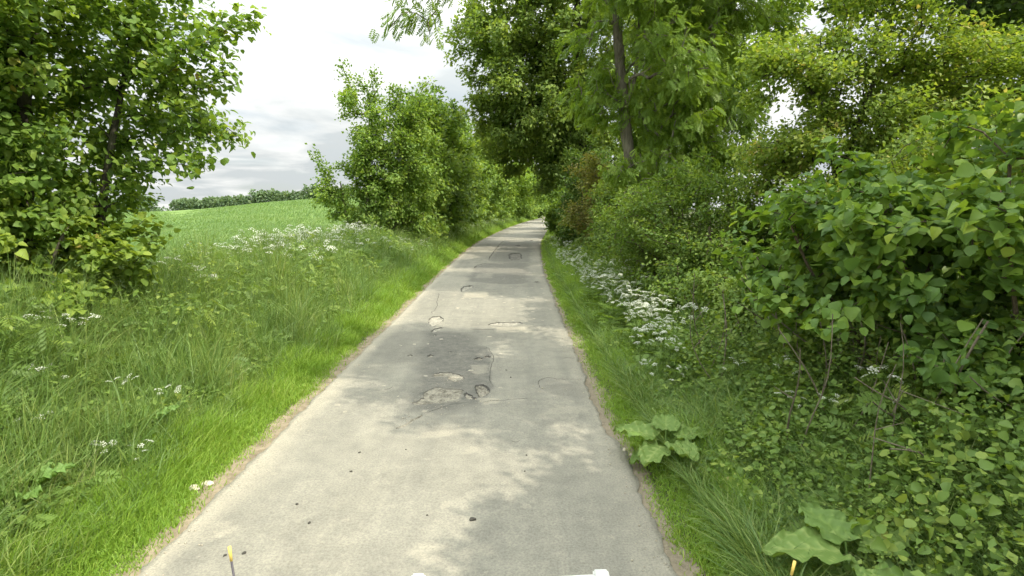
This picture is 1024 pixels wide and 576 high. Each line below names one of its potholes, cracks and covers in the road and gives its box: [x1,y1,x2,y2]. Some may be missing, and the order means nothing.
crack [396,403,458,429]
pothole [432,372,464,382]
pothole [413,387,464,405]
pothole [475,384,490,397]
pothole [428,316,444,327]
